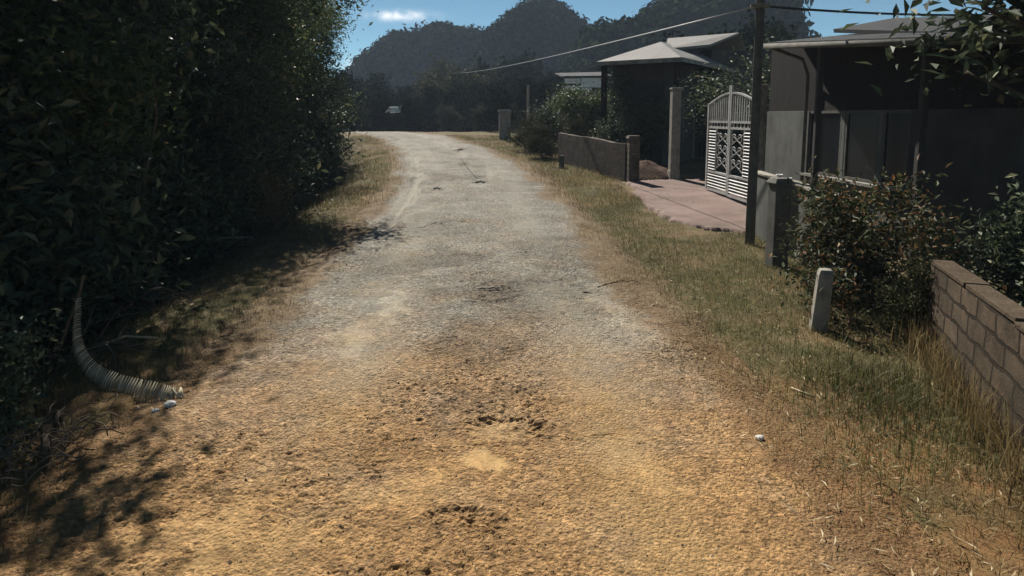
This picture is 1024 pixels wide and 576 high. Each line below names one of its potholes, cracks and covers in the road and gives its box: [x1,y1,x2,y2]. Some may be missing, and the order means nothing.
pothole [415,500,510,538]
crack [455,158,487,181]
pothole [452,414,553,447]
